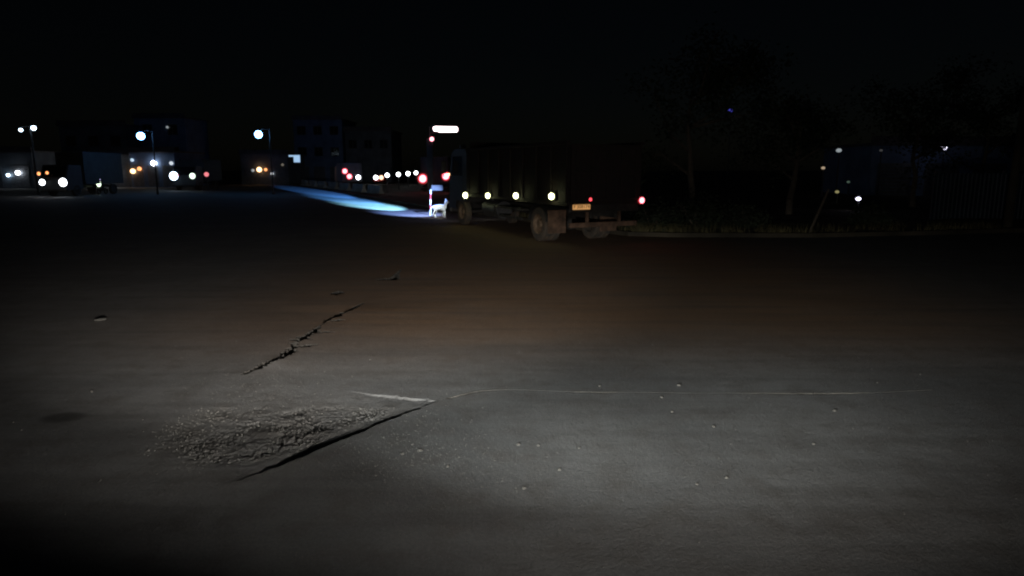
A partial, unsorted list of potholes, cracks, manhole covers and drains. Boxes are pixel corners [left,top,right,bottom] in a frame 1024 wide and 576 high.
crack [241,291,364,375]
